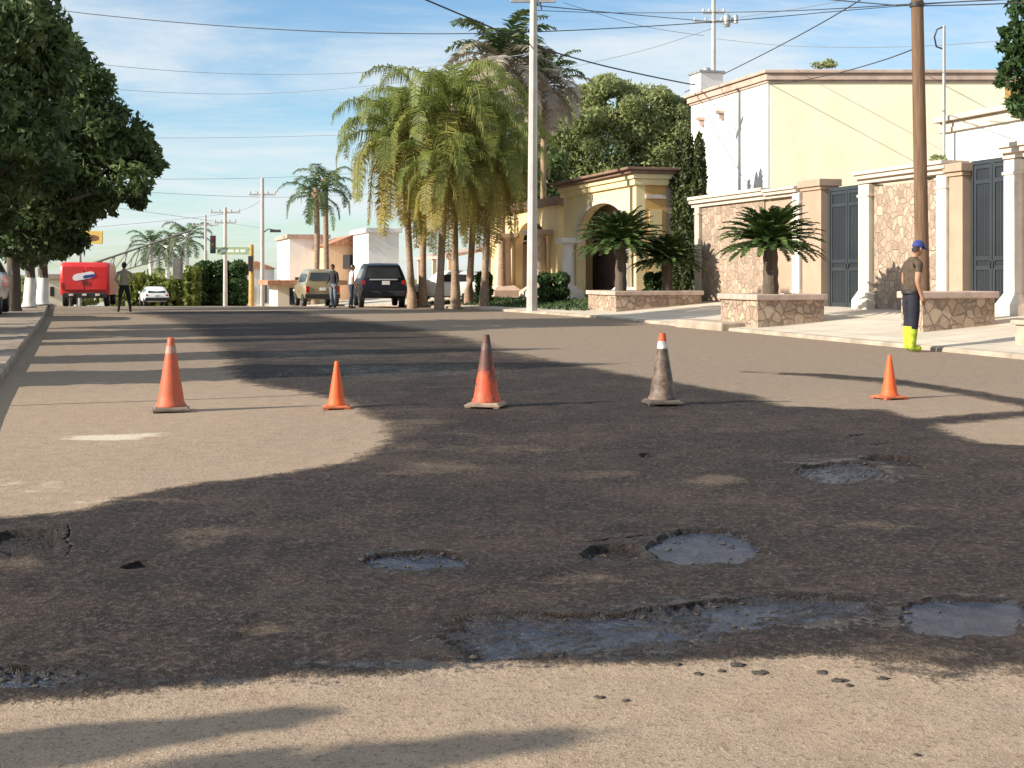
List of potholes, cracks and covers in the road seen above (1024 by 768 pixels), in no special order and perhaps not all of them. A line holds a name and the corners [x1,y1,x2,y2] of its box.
pothole [358,549,480,571]
pothole [644,528,768,566]
pothole [0,528,62,558]
pothole [428,591,891,663]
crack [62,523,74,556]
pothole [120,560,152,569]
pothole [898,594,1024,639]
pothole [794,461,887,484]
pothole [578,543,644,565]
